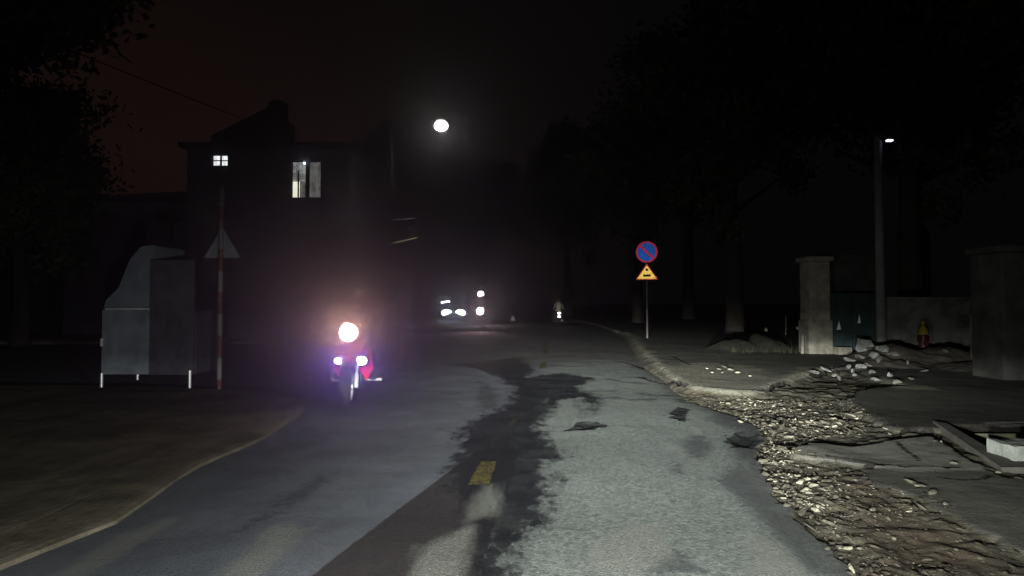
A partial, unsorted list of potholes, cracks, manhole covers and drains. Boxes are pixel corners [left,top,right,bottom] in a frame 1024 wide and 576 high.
crack [778,423,995,481]
pothole [564,421,608,431]
pothole [668,407,690,421]
pothole [722,432,765,449]
